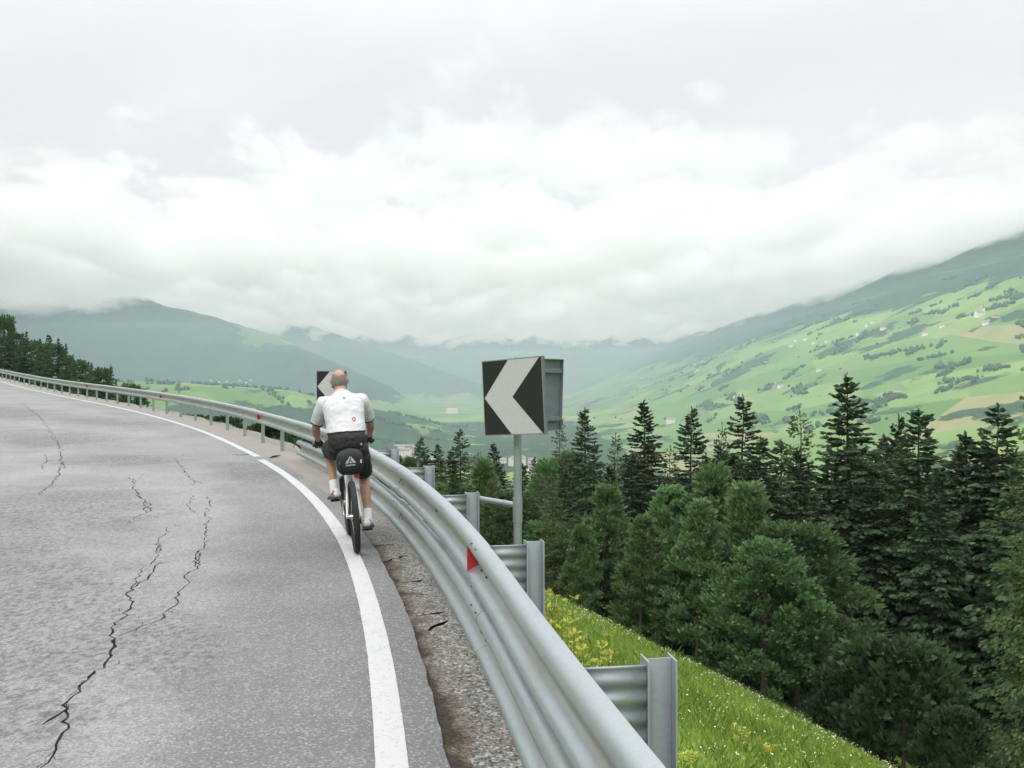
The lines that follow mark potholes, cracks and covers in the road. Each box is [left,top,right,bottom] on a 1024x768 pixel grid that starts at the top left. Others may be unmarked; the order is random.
crack [25,406,66,495]
crack [28,457,212,768]
crack [419,612,448,631]
